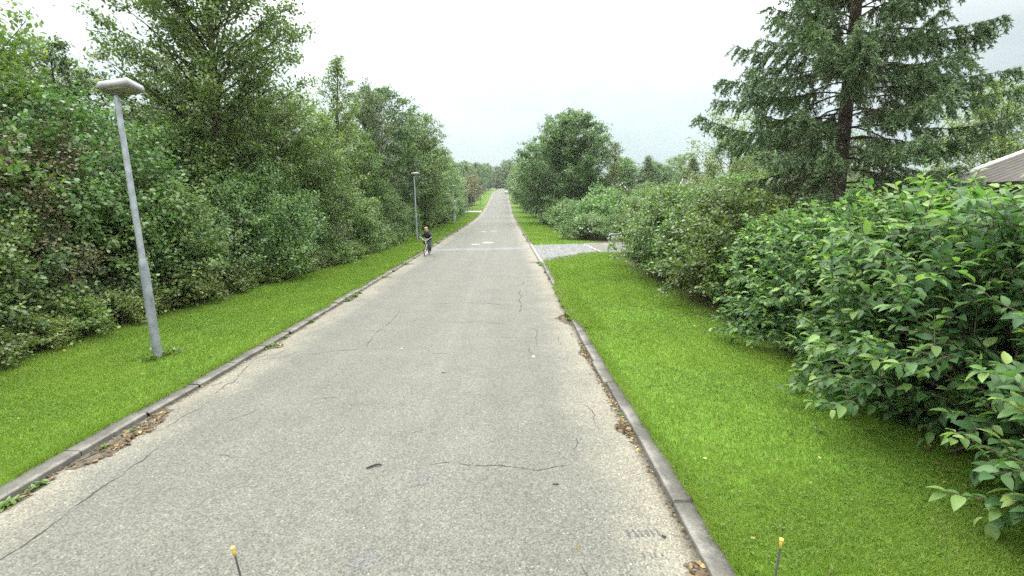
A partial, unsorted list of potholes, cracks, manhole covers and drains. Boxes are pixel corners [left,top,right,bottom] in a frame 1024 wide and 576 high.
crack [0,316,396,560]
